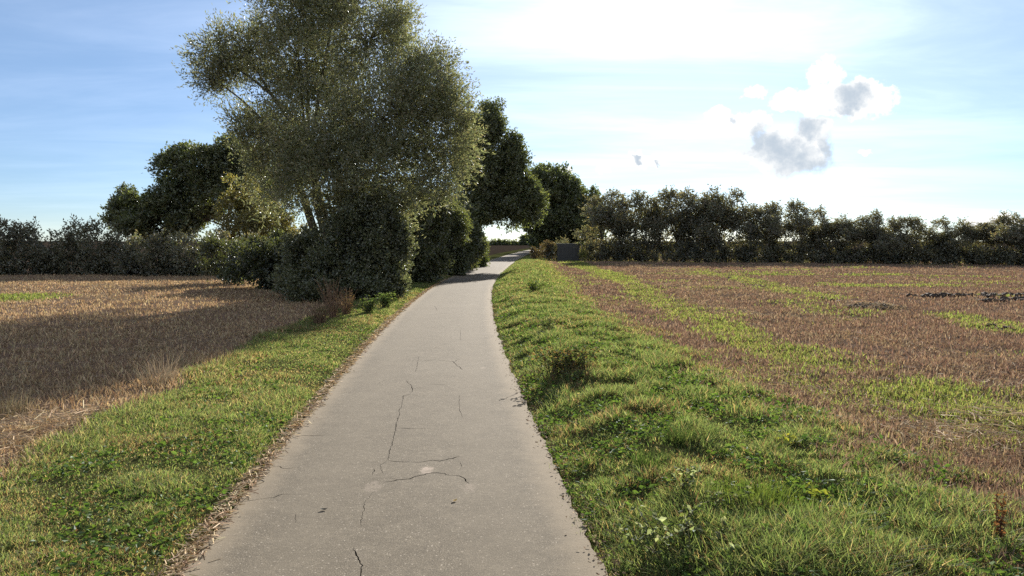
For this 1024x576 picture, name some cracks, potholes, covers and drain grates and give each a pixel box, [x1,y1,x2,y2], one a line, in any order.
crack [372,358,468,483]
